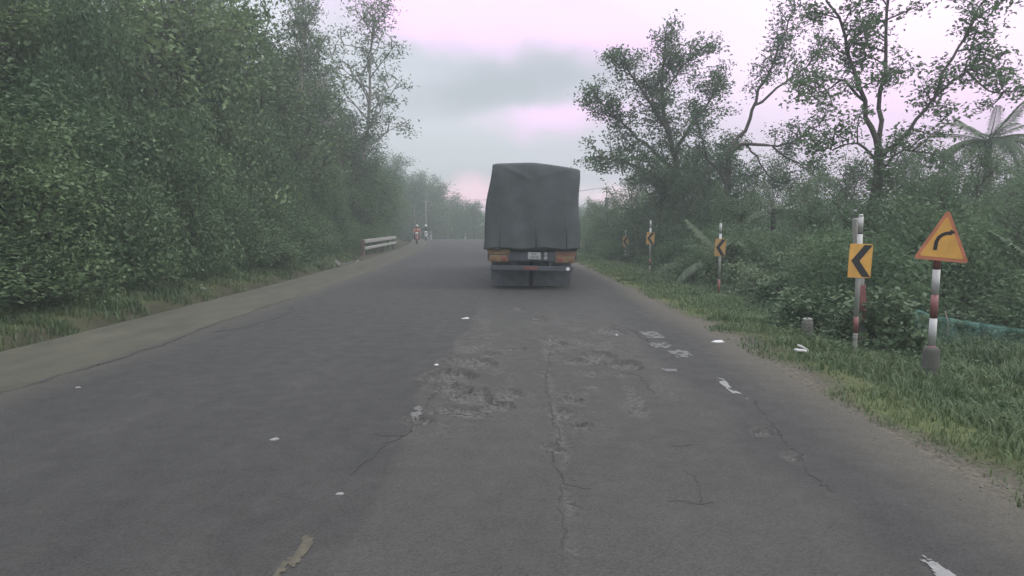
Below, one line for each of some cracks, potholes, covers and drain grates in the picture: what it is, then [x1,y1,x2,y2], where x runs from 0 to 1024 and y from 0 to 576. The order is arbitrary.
pothole [599,358,651,373]
pothole [569,421,598,430]
pothole [547,406,579,421]
pothole [558,357,601,367]
pothole [569,349,621,365]
pothole [422,403,498,421]
pothole [491,386,528,402]
pothole [412,367,486,385]
pothole [557,395,586,405]
crack [351,374,482,474]
pothole [419,381,476,399]
pothole [480,401,517,415]
